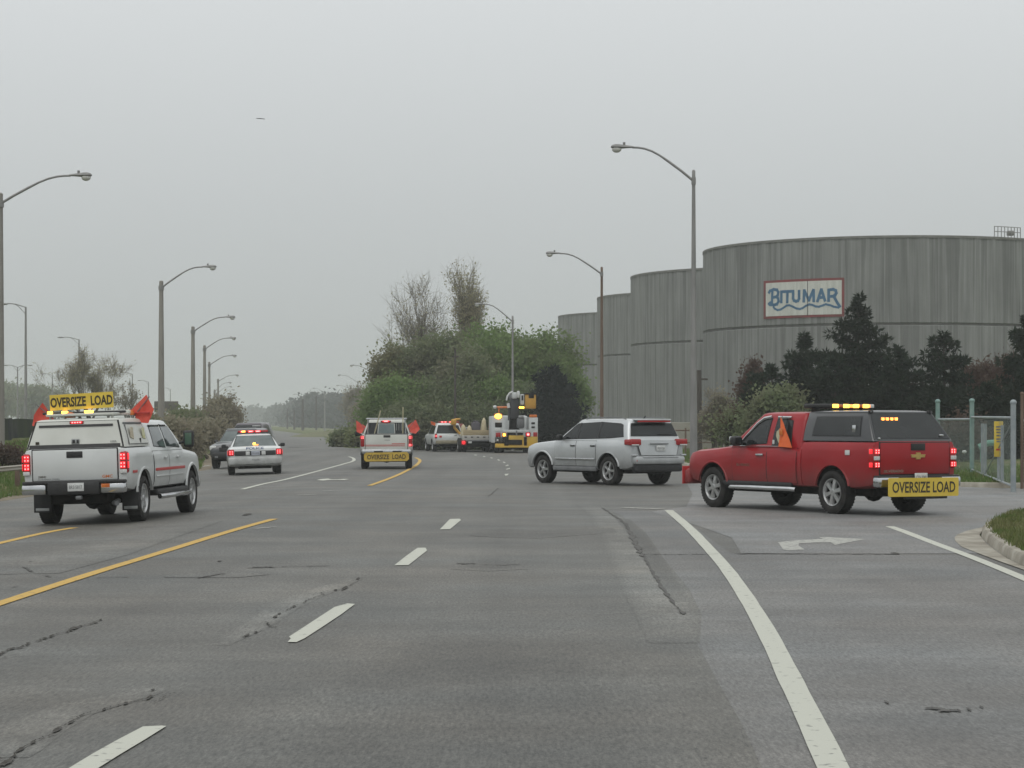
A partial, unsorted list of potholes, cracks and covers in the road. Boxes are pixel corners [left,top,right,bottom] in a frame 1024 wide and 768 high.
crack [0,692,175,766]
crack [0,619,102,657]
